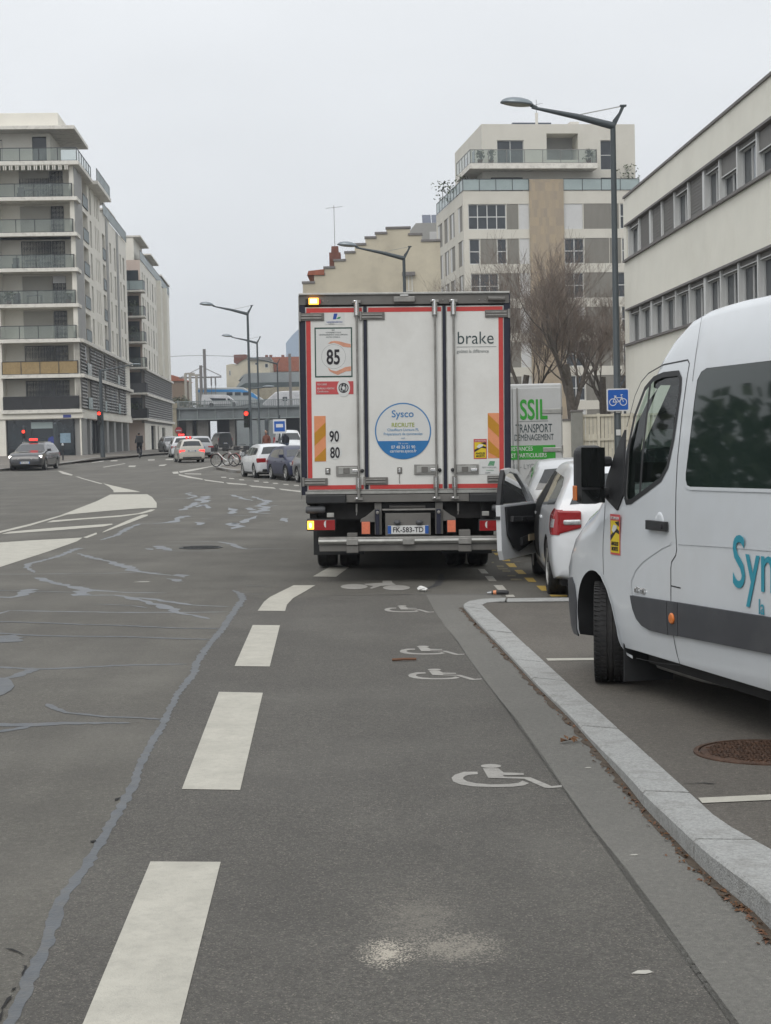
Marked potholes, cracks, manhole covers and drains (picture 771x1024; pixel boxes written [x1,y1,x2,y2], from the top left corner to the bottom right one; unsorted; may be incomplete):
manhole cover [693,739,771,766]
